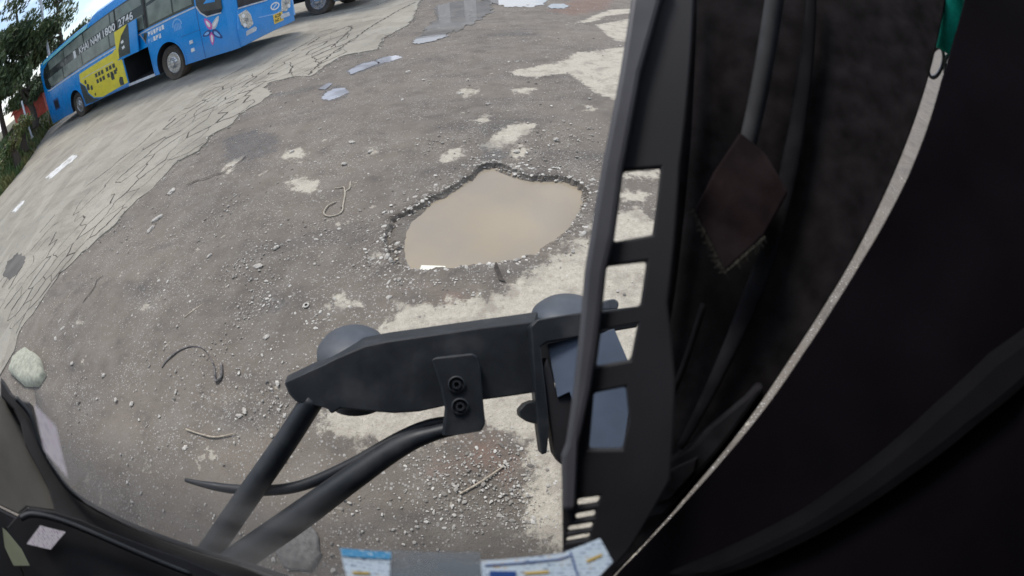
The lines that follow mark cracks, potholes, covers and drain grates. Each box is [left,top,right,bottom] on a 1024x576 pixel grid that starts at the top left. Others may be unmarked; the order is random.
crack [0,1,415,333]
pothole [362,154,599,284]
